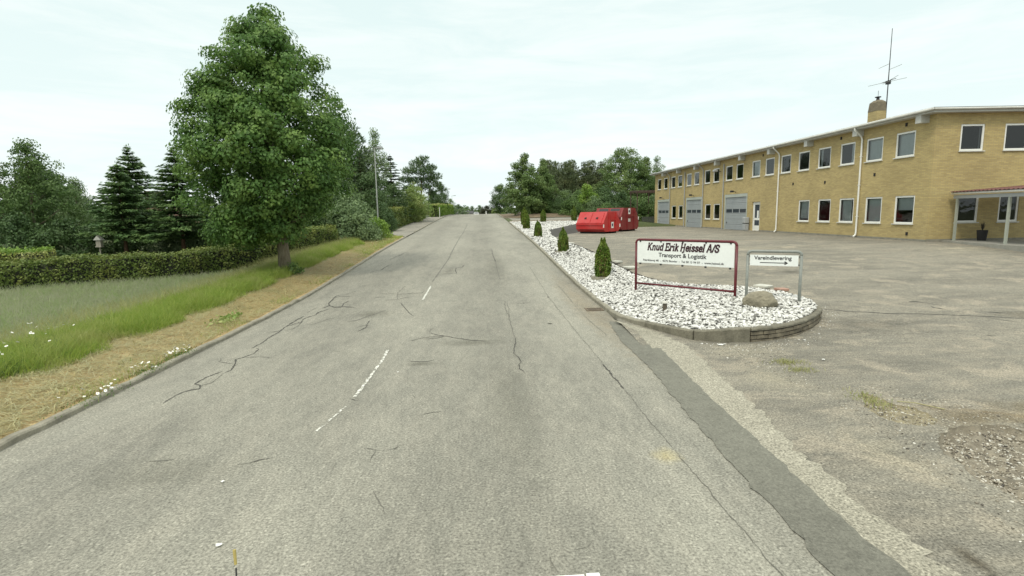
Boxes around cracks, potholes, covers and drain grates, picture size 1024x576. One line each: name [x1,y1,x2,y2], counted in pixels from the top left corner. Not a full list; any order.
pothole [938,424,1024,506]
crack [504,301,530,373]
crack [165,287,424,402]
